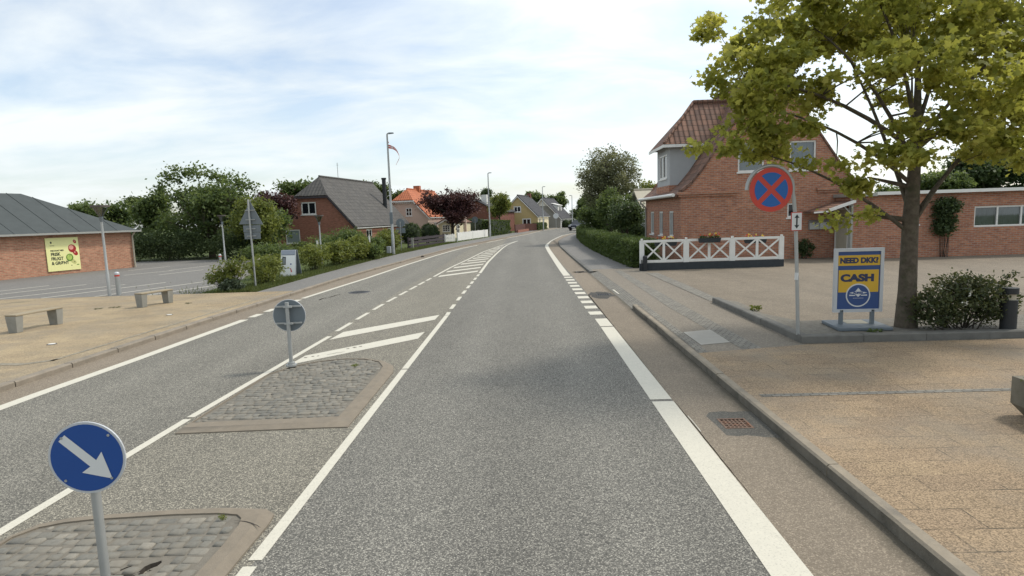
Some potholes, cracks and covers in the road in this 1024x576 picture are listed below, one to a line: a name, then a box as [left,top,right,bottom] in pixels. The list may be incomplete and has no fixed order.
drain grate [717,418,754,429]
